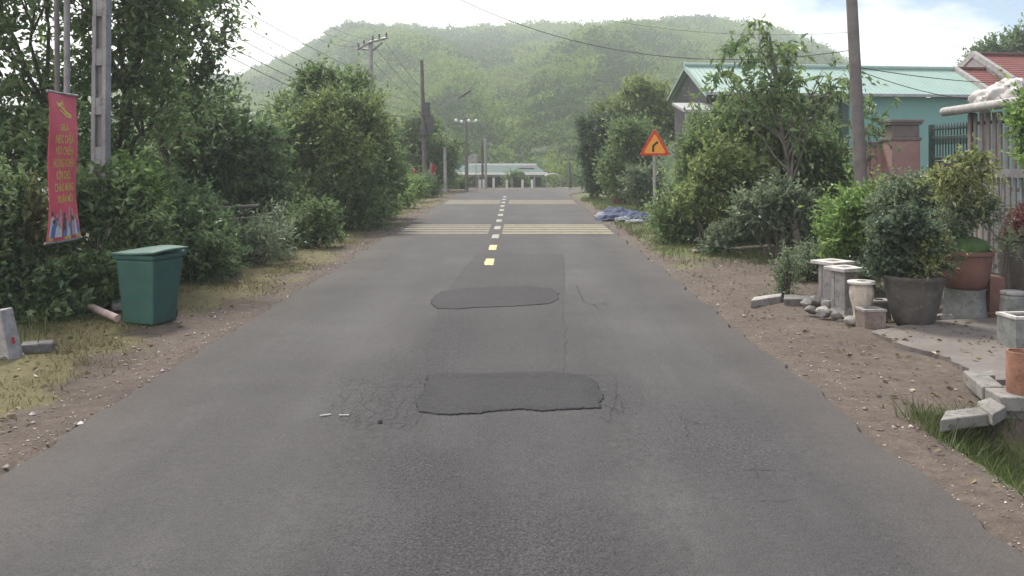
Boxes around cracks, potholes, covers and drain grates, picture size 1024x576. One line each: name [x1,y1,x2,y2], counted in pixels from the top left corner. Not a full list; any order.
crack [594,374,624,424]
crack [322,376,423,430]
